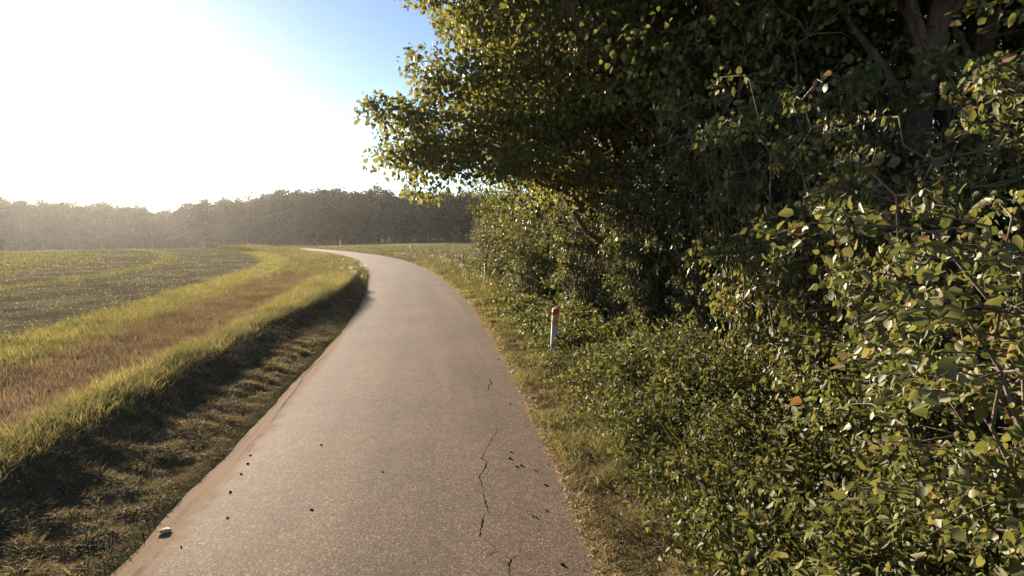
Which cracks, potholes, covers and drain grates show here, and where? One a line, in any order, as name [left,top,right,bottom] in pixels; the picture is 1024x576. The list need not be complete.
crack [477,429,516,576]
